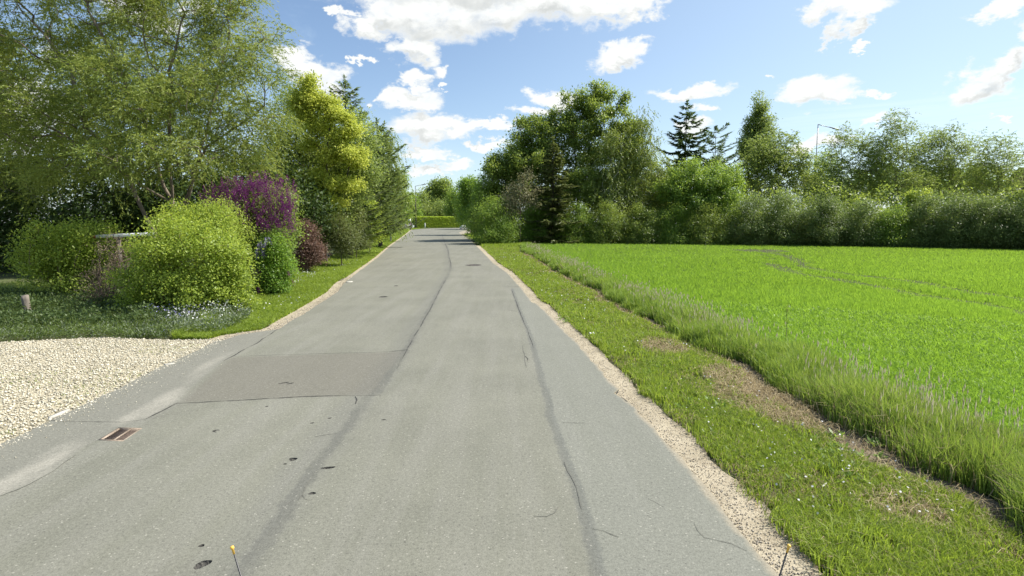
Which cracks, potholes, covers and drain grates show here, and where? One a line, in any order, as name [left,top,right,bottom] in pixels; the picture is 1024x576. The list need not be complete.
drain grate [98,427,142,441]
